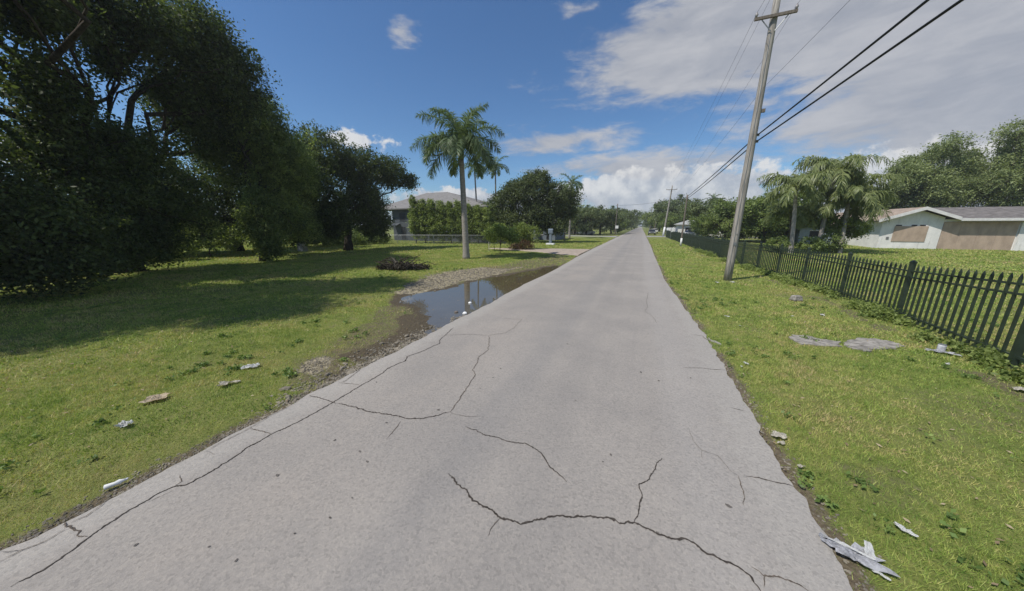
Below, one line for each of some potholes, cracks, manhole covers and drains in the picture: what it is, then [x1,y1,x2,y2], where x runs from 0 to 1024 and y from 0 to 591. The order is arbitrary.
crack [1,318,807,591]
